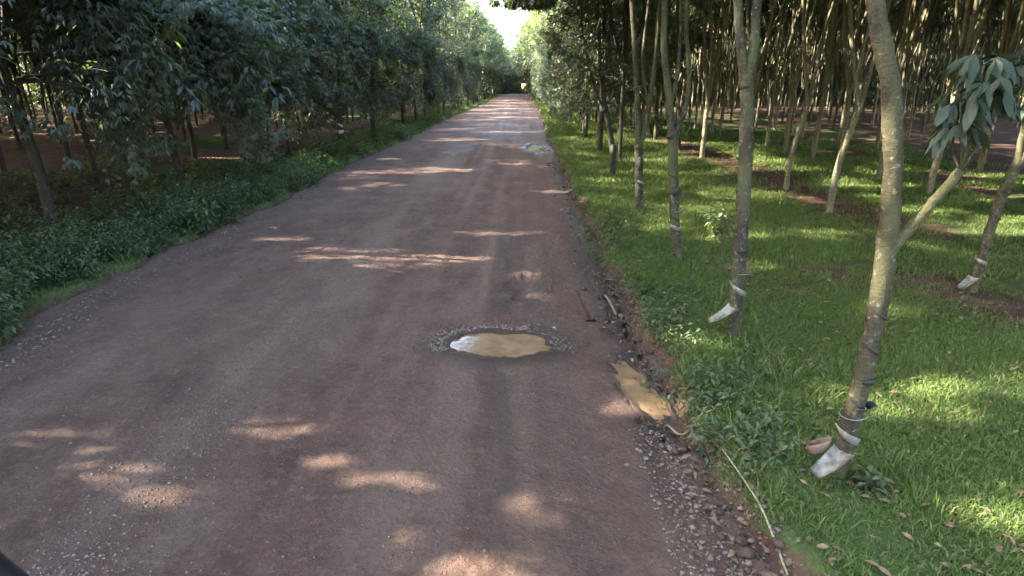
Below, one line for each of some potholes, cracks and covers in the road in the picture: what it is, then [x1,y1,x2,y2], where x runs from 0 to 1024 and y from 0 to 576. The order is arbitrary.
pothole [605,353,679,431]
pothole [443,328,558,360]
pothole [525,143,555,155]
pothole [500,269,555,310]
